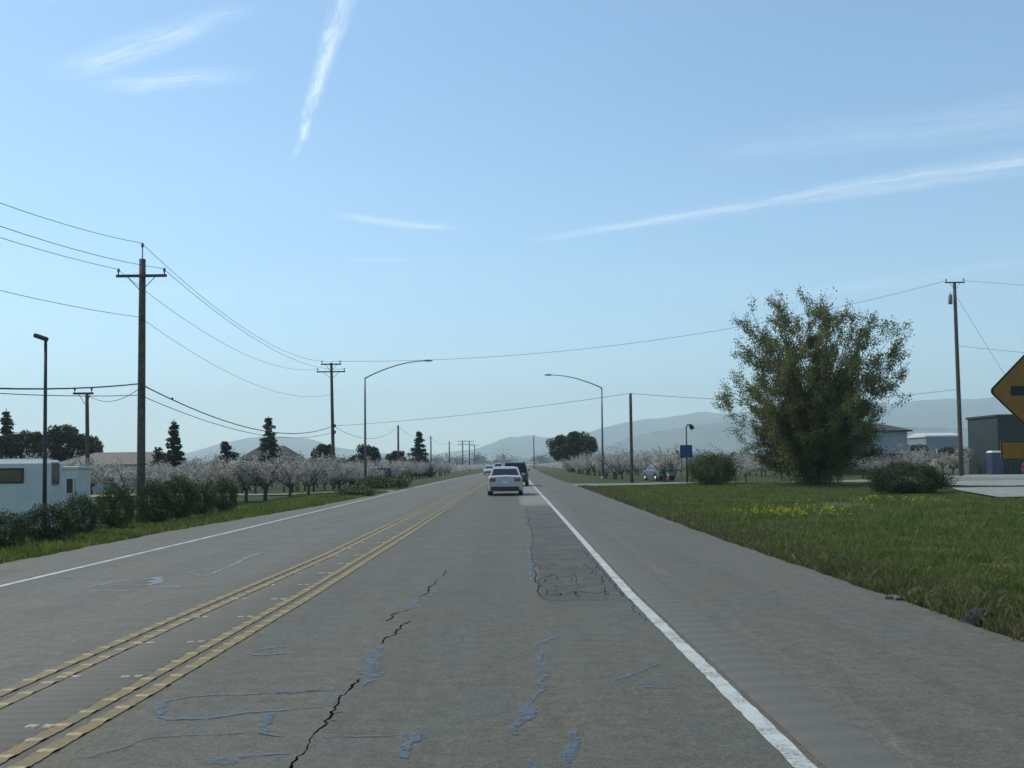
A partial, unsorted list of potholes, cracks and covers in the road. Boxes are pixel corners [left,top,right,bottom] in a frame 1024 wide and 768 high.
crack [526,508,621,601]
crack [289,570,447,768]
